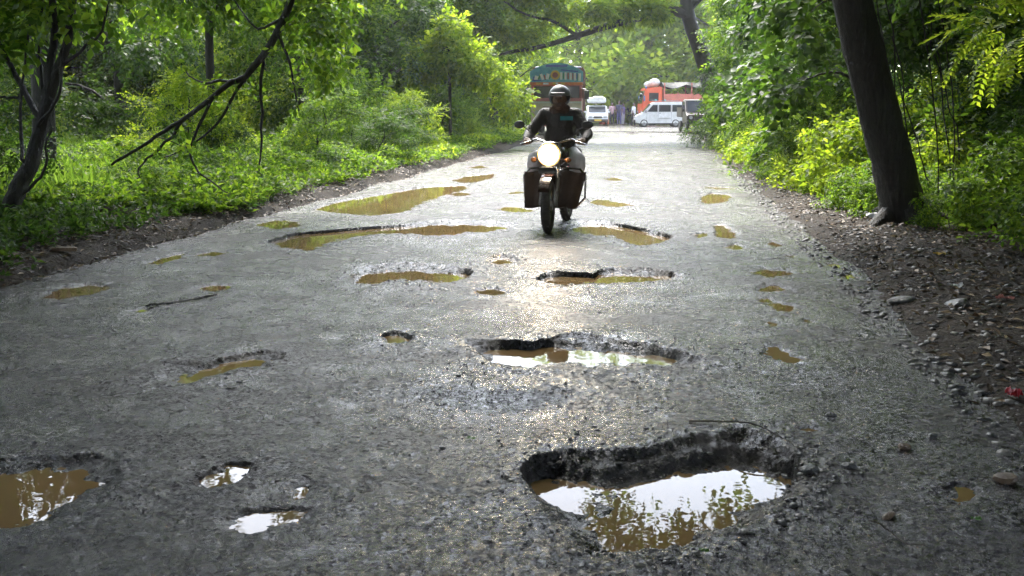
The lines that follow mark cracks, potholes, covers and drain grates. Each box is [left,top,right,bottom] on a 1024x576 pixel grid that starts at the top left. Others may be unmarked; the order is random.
pothole [558,219,678,248]
pothole [536,267,683,287]
pothole [520,425,810,560]
crack [145,294,217,307]
pothole [348,261,475,287]
pothole [262,219,517,252]
pothole [189,460,256,492]
pothole [378,330,416,346]
pothole [306,183,476,216]
pothole [453,330,716,371]
pothole [143,349,290,385]
pothole [0,451,127,530]
